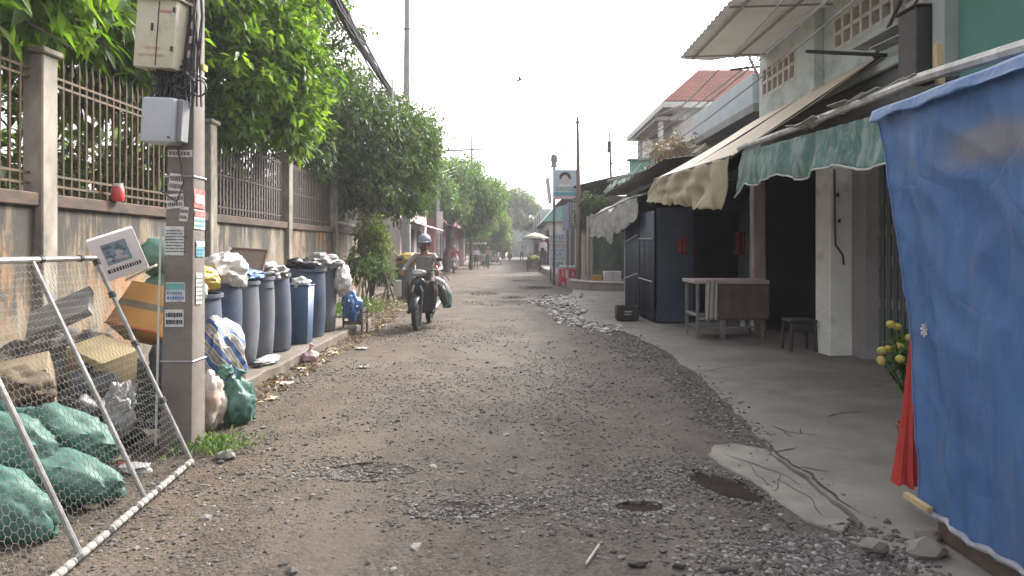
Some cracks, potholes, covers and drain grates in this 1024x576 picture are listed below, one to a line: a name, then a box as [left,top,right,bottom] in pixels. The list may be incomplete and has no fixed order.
pothole [599,496,686,518]
pothole [668,460,782,517]
pothole [319,461,418,483]
crack [725,426,859,514]
